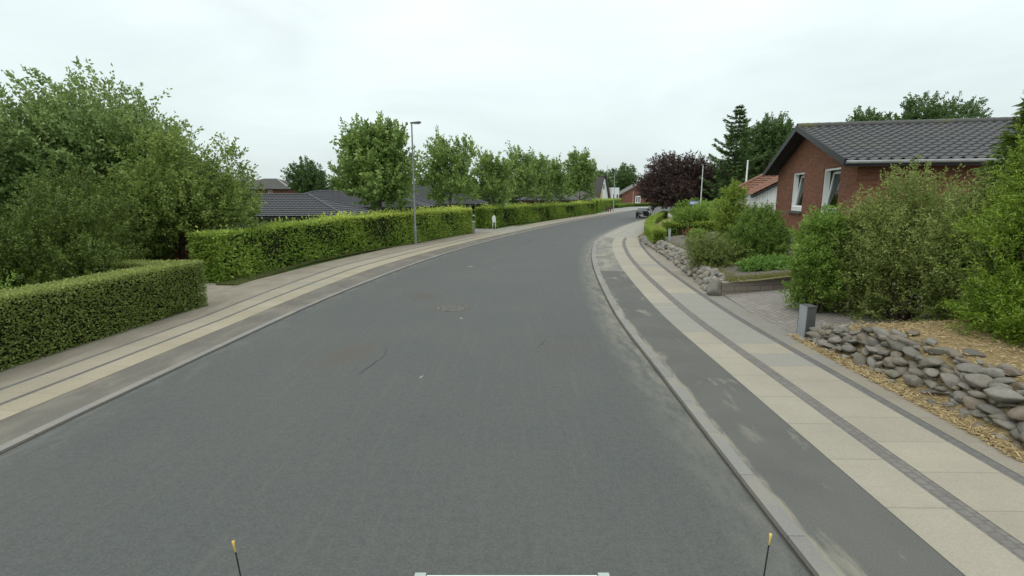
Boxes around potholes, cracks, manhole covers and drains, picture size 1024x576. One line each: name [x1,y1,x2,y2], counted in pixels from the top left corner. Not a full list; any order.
manhole cover [437,304,468,312]
